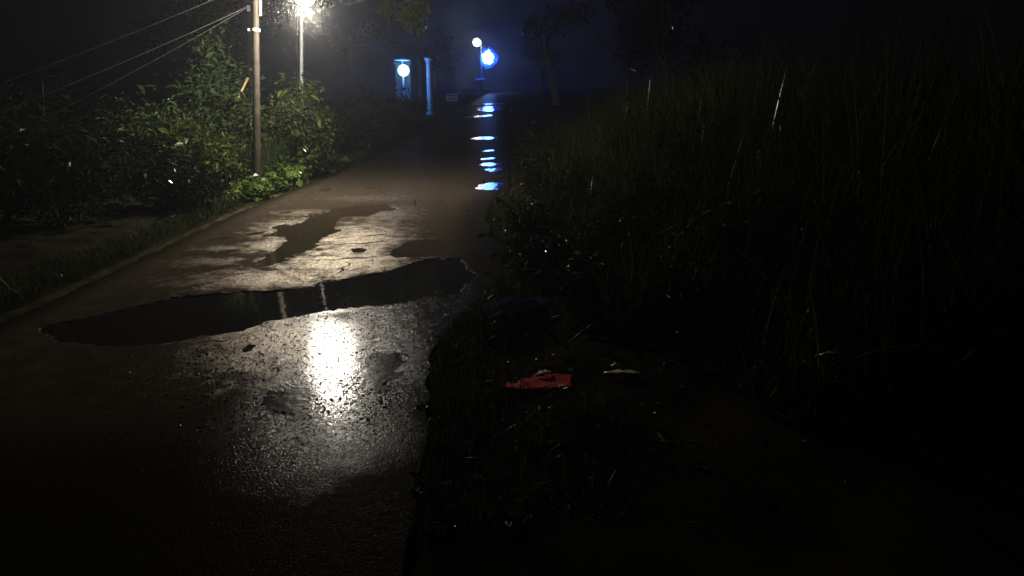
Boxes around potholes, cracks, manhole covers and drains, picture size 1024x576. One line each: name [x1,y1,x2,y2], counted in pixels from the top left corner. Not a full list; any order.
pothole [37,257,478,347]
pothole [251,204,400,268]
crack [315,234,390,273]
